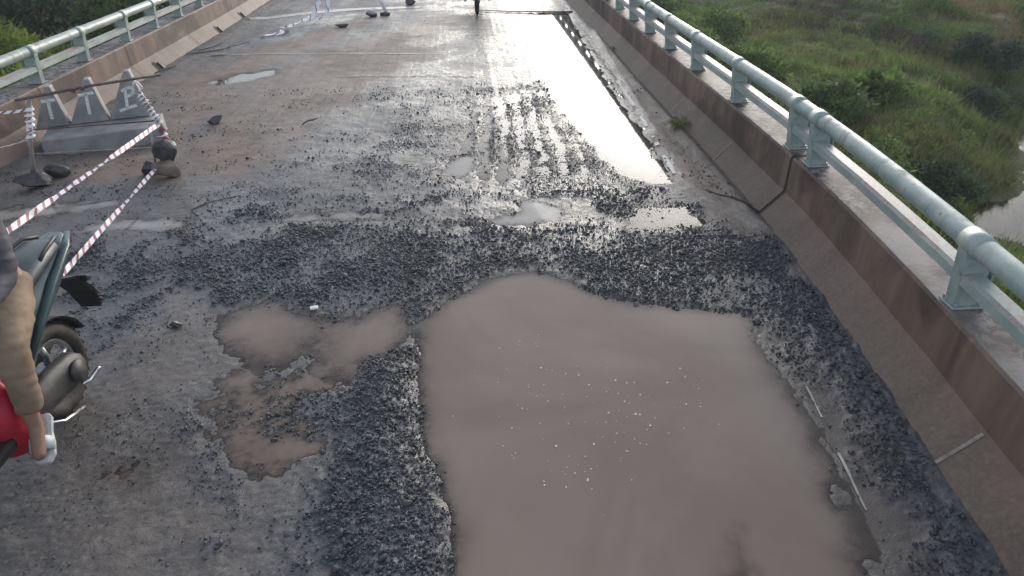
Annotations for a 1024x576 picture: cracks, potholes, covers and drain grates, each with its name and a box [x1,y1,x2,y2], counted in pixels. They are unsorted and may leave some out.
pothole [303,298,422,390]
pothole [442,190,581,231]
pothole [522,12,681,187]
pothole [204,292,338,381]
pothole [603,198,710,238]
pothole [398,264,892,576]
pothole [197,67,283,86]
pothole [425,151,485,181]
pothole [187,365,367,486]
pothole [450,88,624,194]
crack [191,195,239,216]
